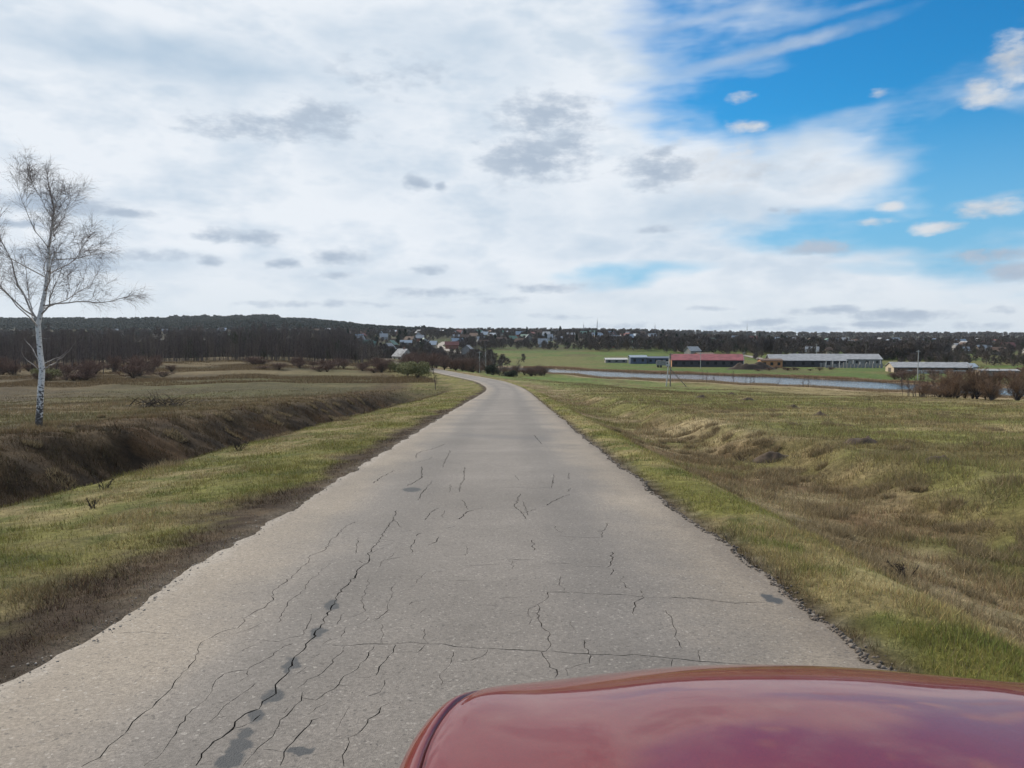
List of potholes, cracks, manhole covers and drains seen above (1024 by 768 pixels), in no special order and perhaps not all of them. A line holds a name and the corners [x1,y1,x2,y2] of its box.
crack [81,445,766,767]
